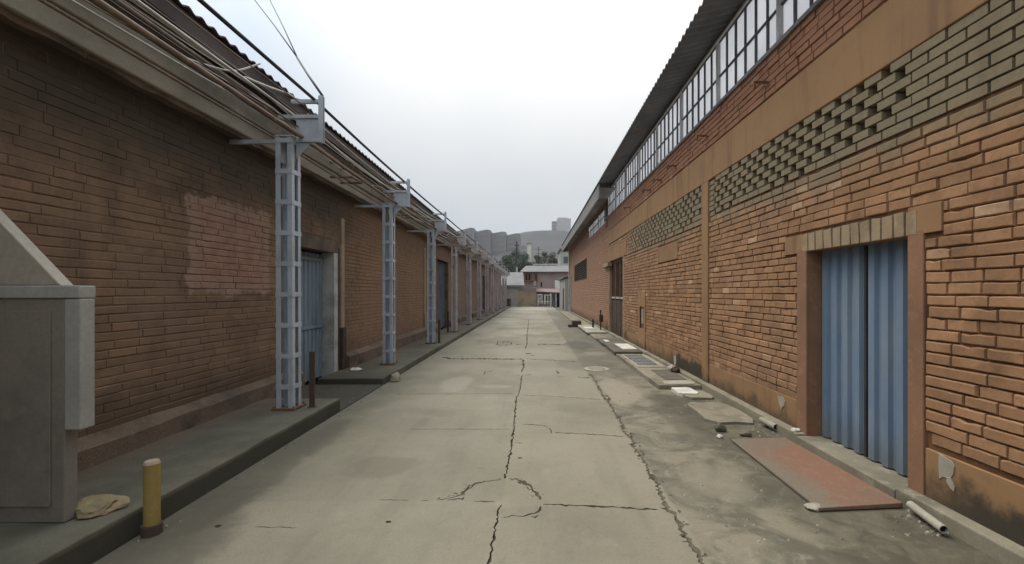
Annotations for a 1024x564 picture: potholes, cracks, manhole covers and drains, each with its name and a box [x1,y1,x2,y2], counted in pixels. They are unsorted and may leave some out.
drain grate [618,354,668,371]
crack [378,321,708,564]
